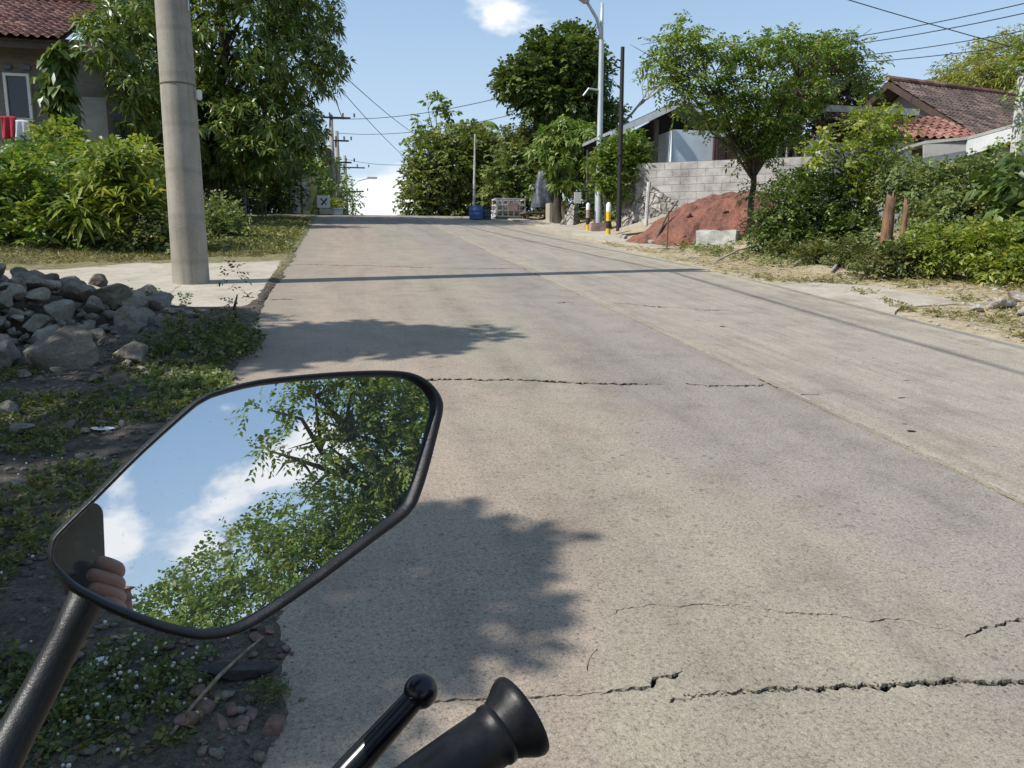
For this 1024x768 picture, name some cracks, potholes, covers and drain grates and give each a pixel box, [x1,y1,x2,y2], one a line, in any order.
crack [672,679,1024,703]
crack [605,675,678,694]
crack [428,379,778,389]
